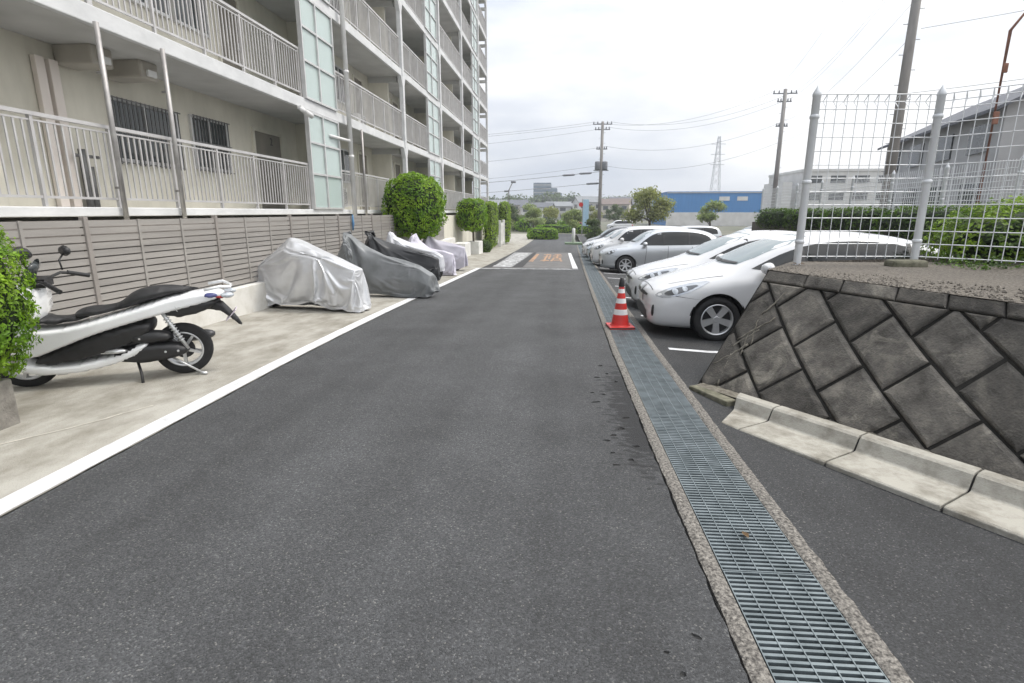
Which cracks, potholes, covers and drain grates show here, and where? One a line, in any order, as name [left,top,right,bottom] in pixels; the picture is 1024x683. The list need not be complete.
drain grate [723,571,890,683]
drain grate [676,472,812,575]
drain grate [614,338,656,357]
drain grate [610,326,644,339]
drain grate [649,417,740,475]
drain grate [621,356,674,381]
drain grate [633,381,700,418]
